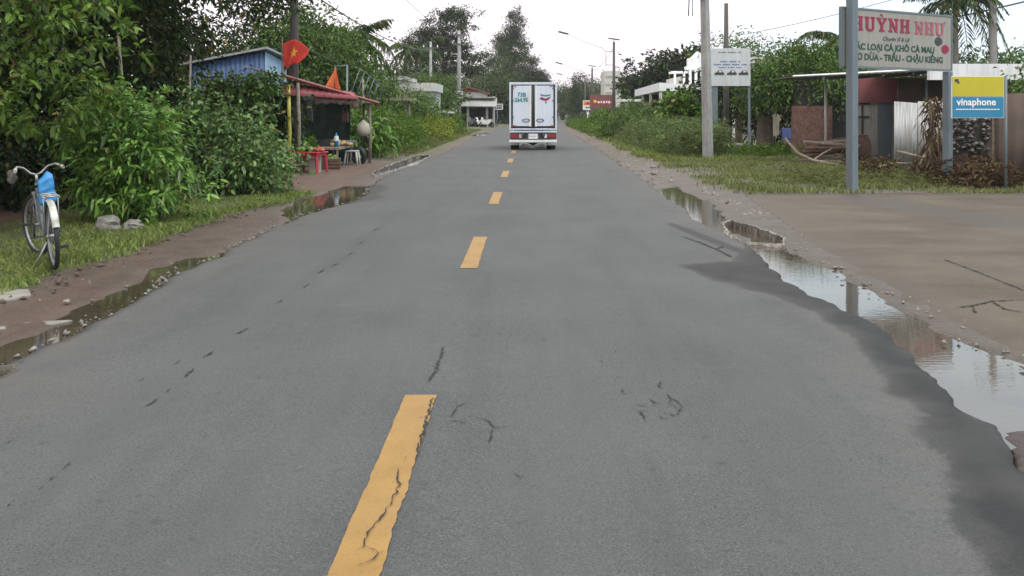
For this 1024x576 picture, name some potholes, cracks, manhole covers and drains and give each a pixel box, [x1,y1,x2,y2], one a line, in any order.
crack [139,228,379,406]
pothole [722,220,786,248]
crack [957,299,1023,313]
crack [685,237,731,257]
crack [429,346,445,380]
crack [621,382,683,422]
crack [415,397,503,460]
